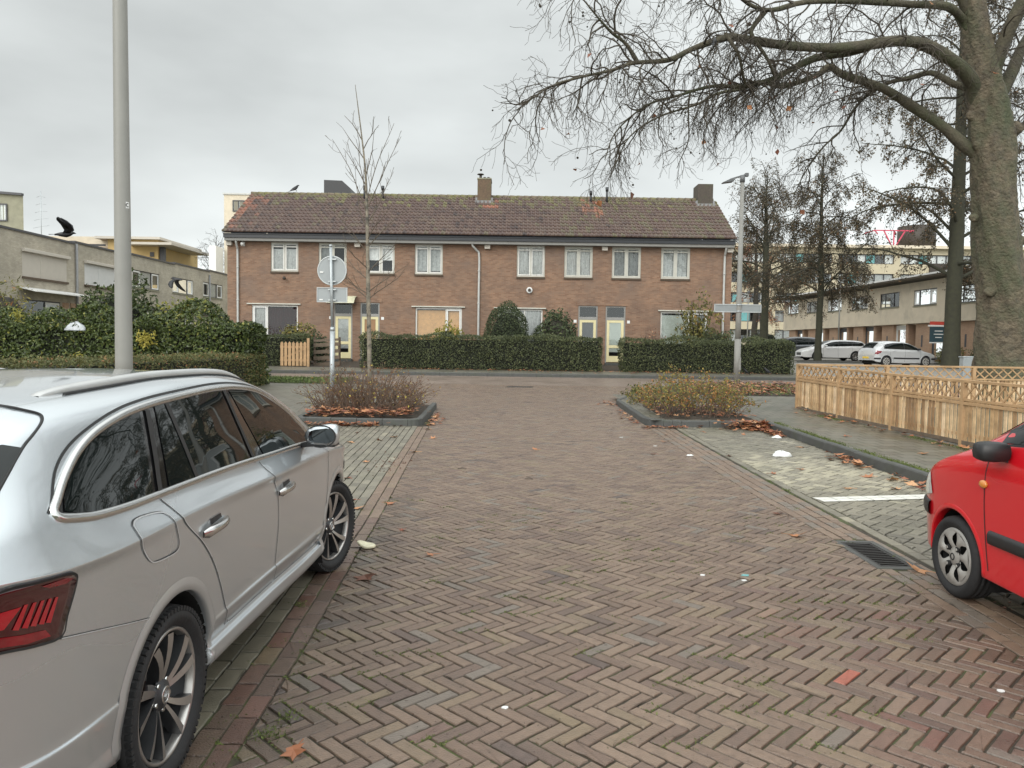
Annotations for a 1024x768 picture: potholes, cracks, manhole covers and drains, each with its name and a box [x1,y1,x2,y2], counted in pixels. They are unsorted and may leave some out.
drain grate [832,540,925,570]
